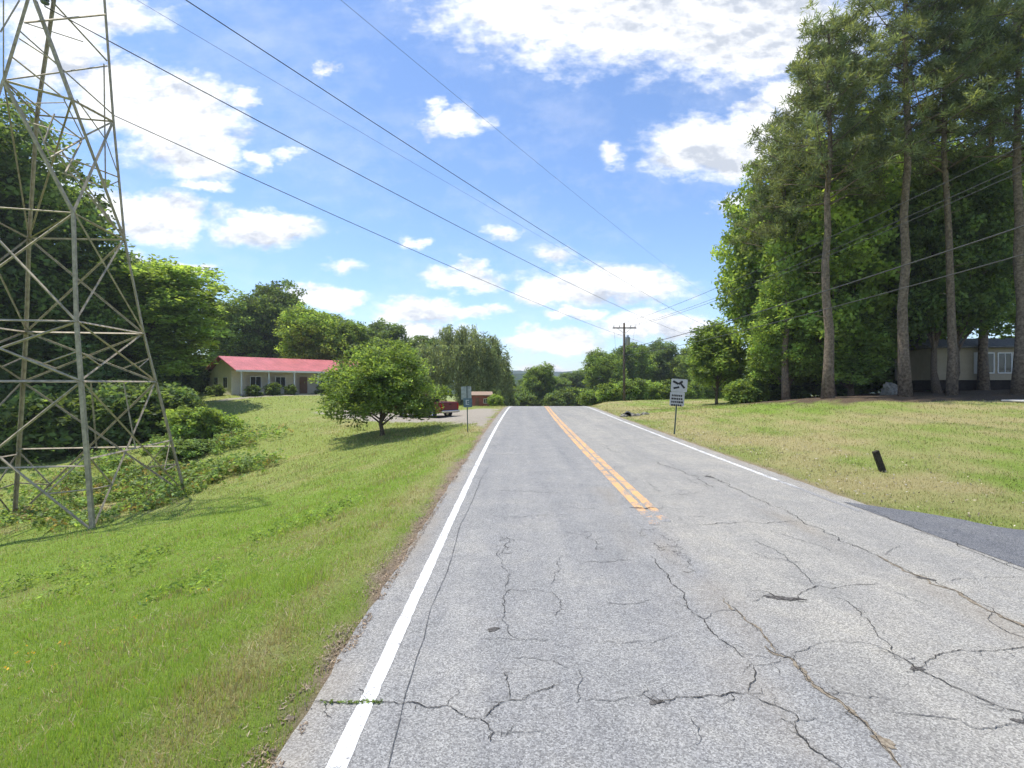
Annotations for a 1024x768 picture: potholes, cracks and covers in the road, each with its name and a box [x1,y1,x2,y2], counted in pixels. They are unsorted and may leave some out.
crack [305,516,1024,768]
